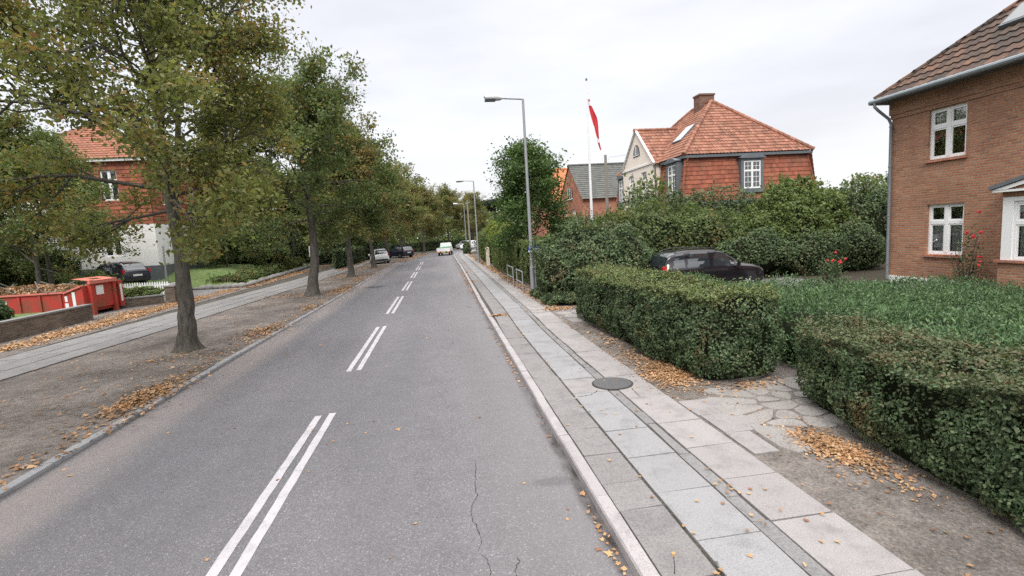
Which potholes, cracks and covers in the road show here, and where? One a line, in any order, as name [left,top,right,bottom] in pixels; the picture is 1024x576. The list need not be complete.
manhole cover [592,377,633,391]
crack [471,464,491,575]
